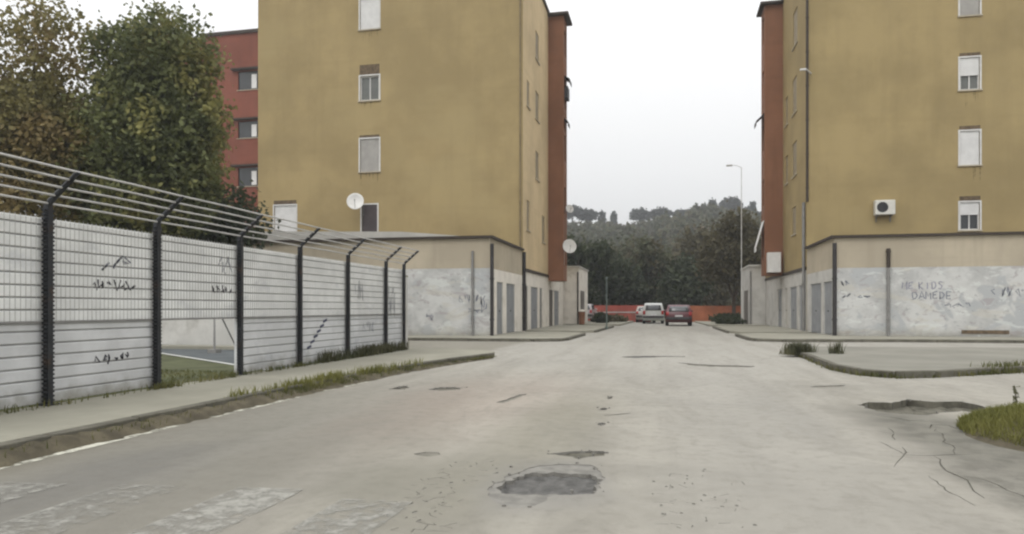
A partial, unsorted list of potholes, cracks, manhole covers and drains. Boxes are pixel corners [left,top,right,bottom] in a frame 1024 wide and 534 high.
crack [382,459,498,532]
pothole [487,462,605,508]
crack [876,415,1024,504]
pothole [547,450,608,459]
pothole [859,399,985,415]
